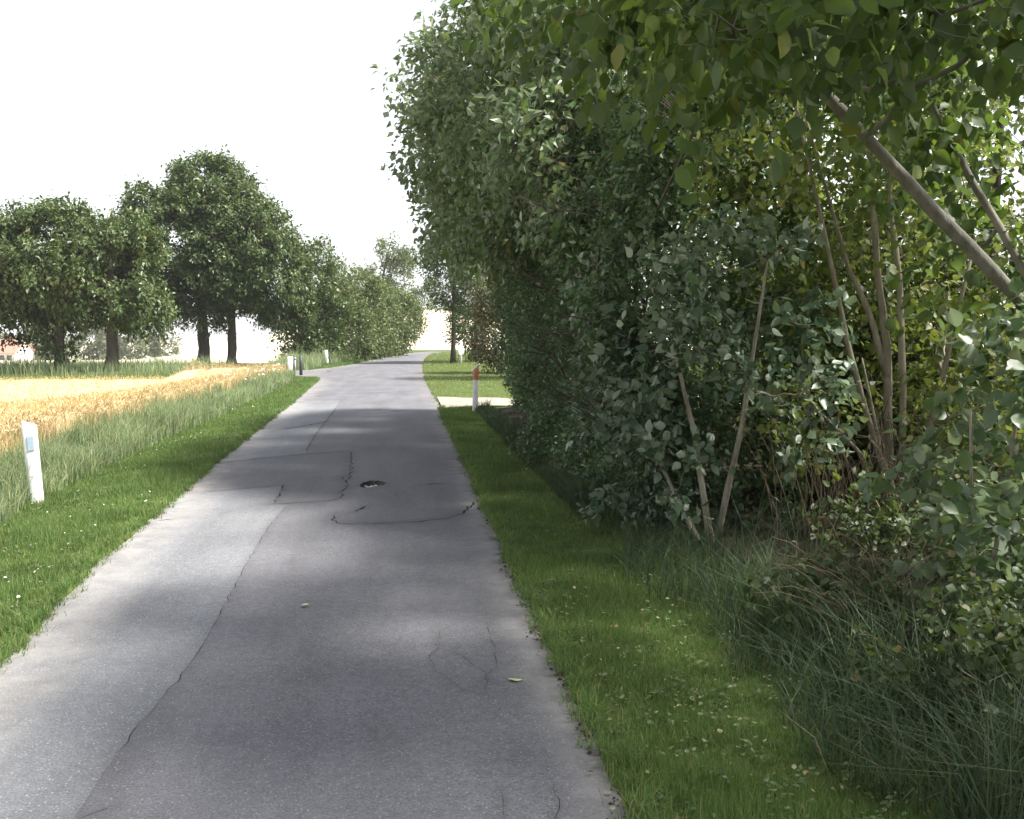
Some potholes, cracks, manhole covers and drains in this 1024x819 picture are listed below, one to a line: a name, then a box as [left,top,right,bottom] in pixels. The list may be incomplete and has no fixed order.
crack [282,452,475,524]
crack [429,627,497,694]
